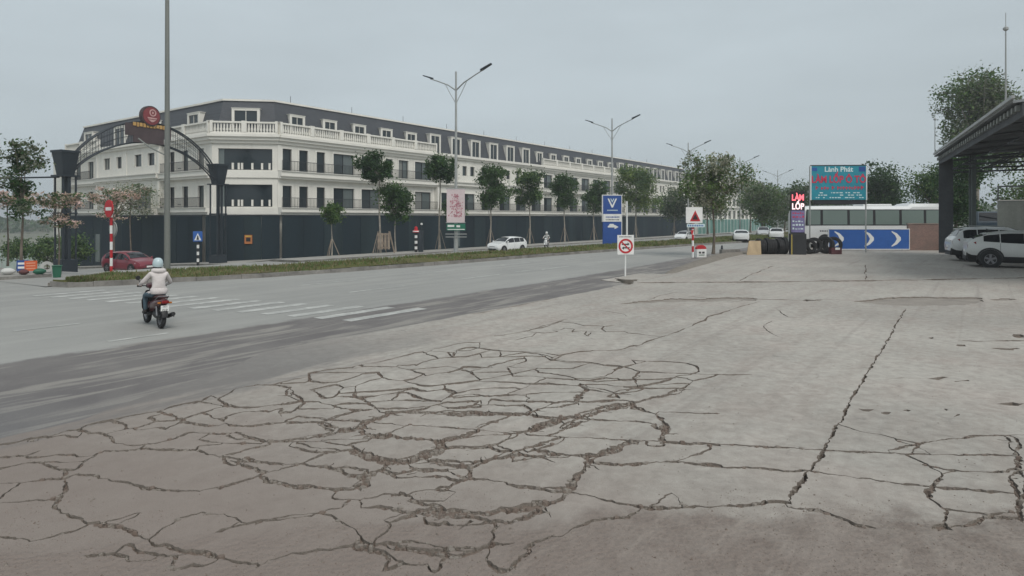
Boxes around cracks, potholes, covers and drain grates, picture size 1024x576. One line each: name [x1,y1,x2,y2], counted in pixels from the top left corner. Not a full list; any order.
crack [0,292,1024,574]
